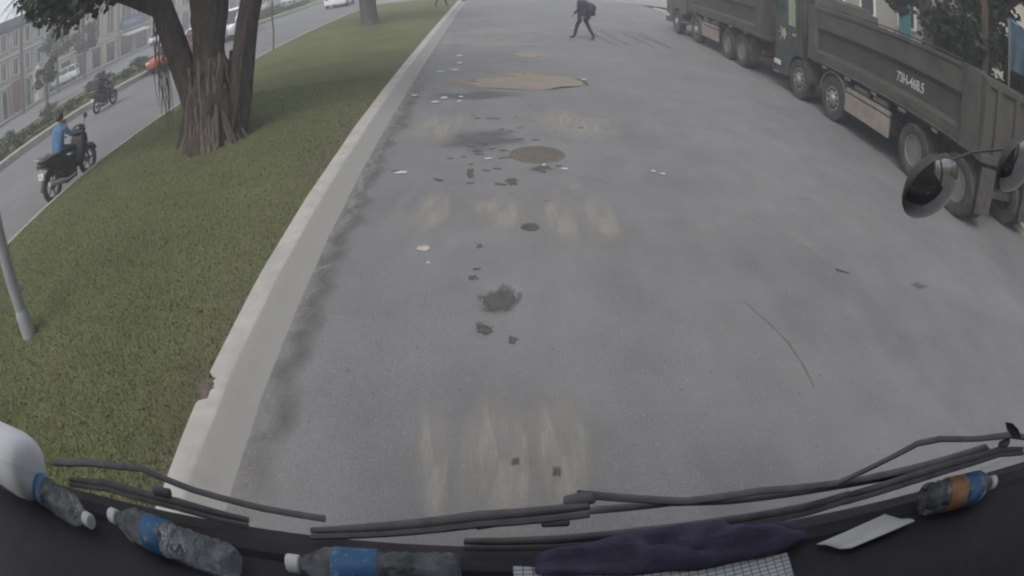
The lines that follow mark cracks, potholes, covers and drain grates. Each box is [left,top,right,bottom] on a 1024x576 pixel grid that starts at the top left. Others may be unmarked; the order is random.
manhole cover [509,146,565,164]
pothole [477,324,492,335]
pothole [481,287,518,311]
